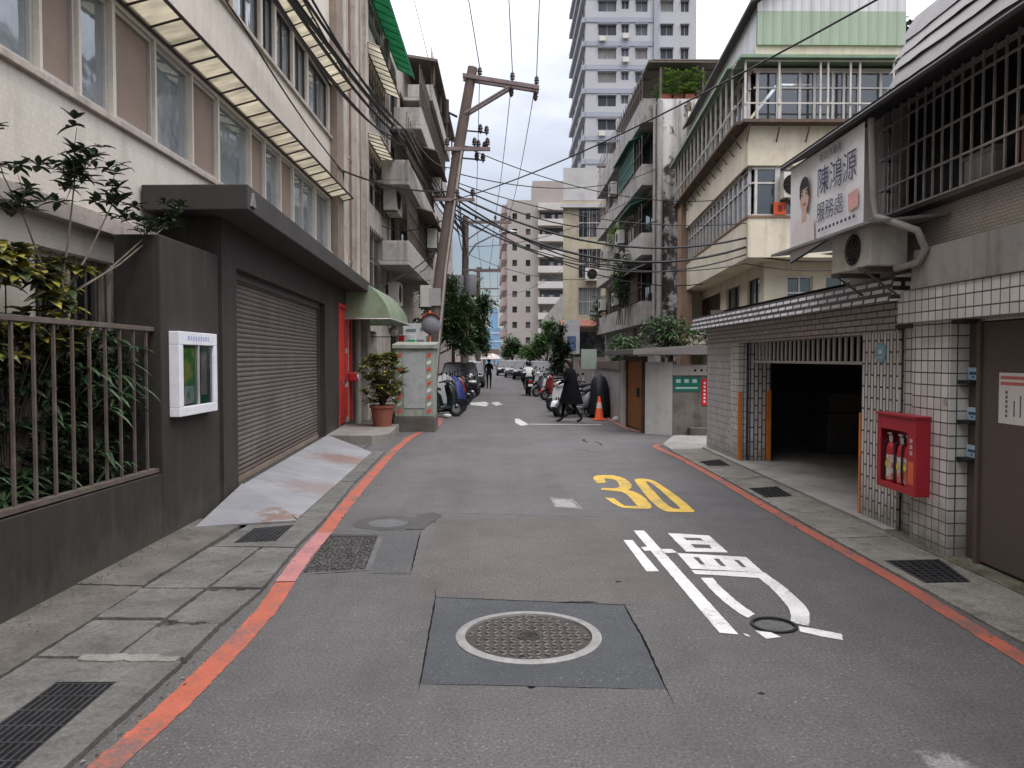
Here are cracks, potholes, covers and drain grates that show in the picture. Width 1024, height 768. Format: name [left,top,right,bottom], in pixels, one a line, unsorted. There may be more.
drain grate [234,525,293,543]
drain grate [0,682,116,768]
manhole cover [368,519,408,527]
drain grate [884,559,970,583]
drain grate [749,487,792,498]
manhole cover [456,611,602,665]
